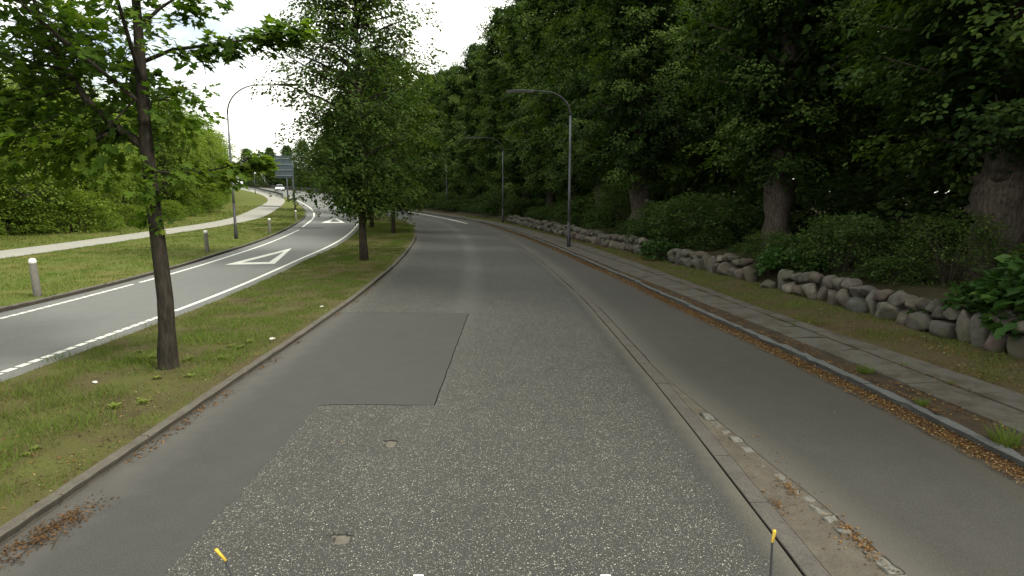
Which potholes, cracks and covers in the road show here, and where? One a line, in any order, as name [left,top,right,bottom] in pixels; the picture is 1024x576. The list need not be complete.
pothole [327,532,355,546]
